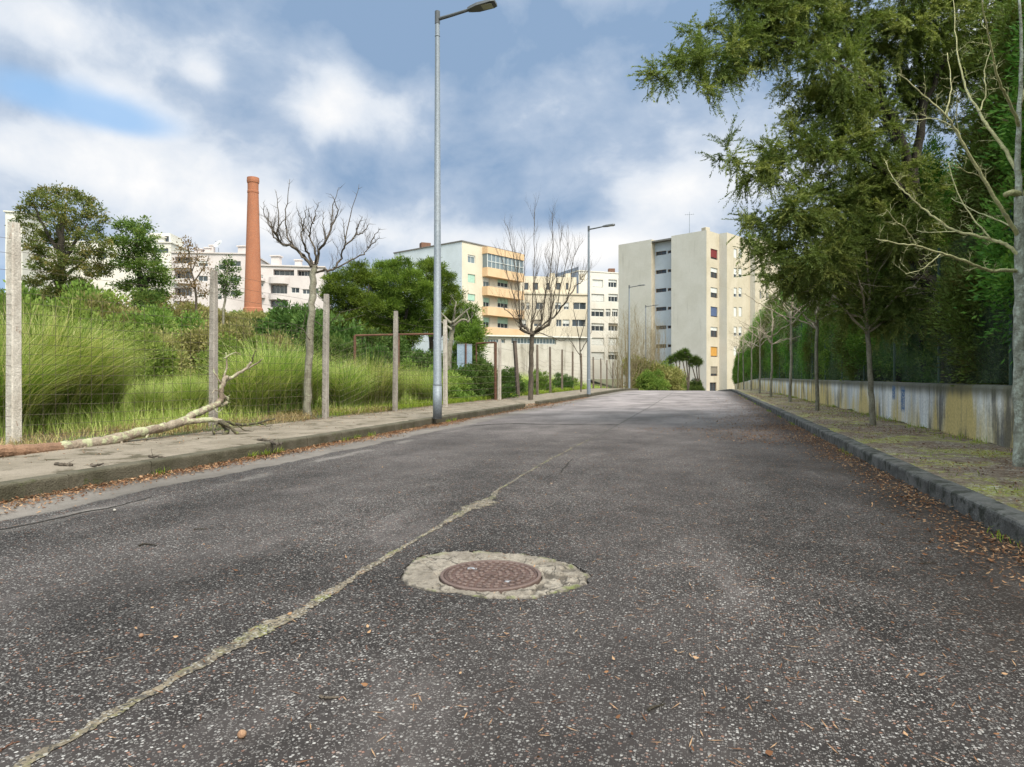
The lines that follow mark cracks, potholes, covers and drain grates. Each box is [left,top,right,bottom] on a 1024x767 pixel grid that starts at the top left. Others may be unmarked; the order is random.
crack [2,393,672,767]
manhole cover [401,550,591,599]
